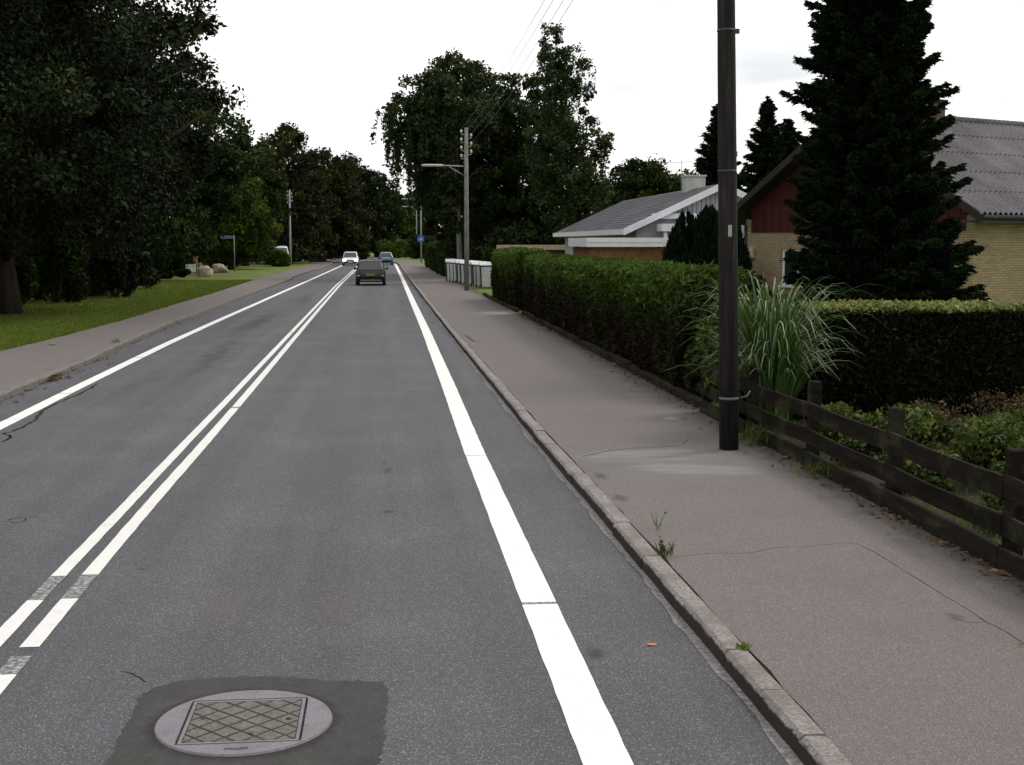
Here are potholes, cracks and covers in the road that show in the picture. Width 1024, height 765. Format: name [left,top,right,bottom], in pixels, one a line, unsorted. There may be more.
crack [676,543,1024,644]
crack [1,384,97,442]
manhole cover [154,690,333,757]
